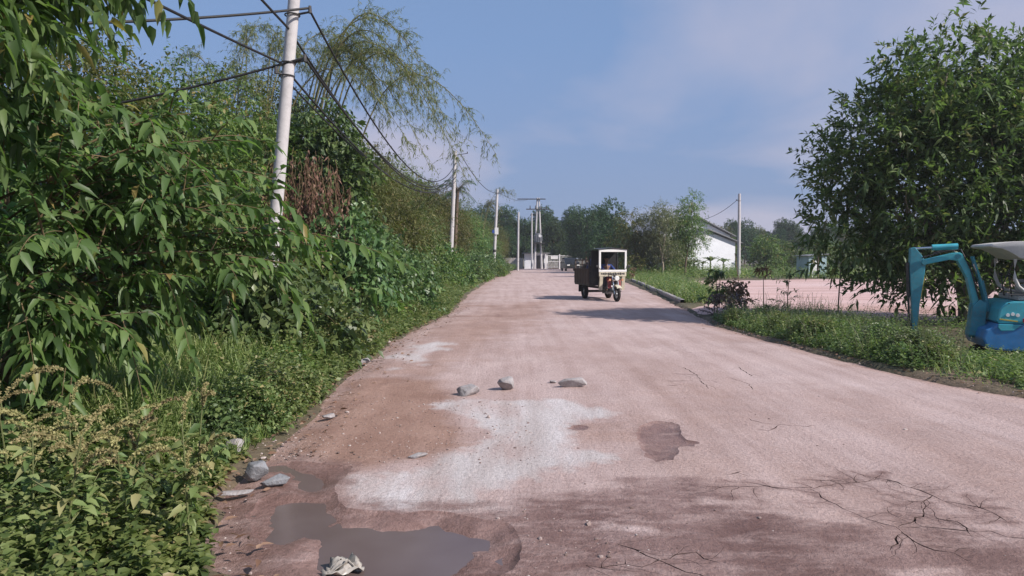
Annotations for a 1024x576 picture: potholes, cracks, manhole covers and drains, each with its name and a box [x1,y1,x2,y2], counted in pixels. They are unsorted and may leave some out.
pothole [636,421,699,462]
pothole [245,461,522,576]
crack [702,470,1024,561]
crack [586,534,724,576]
